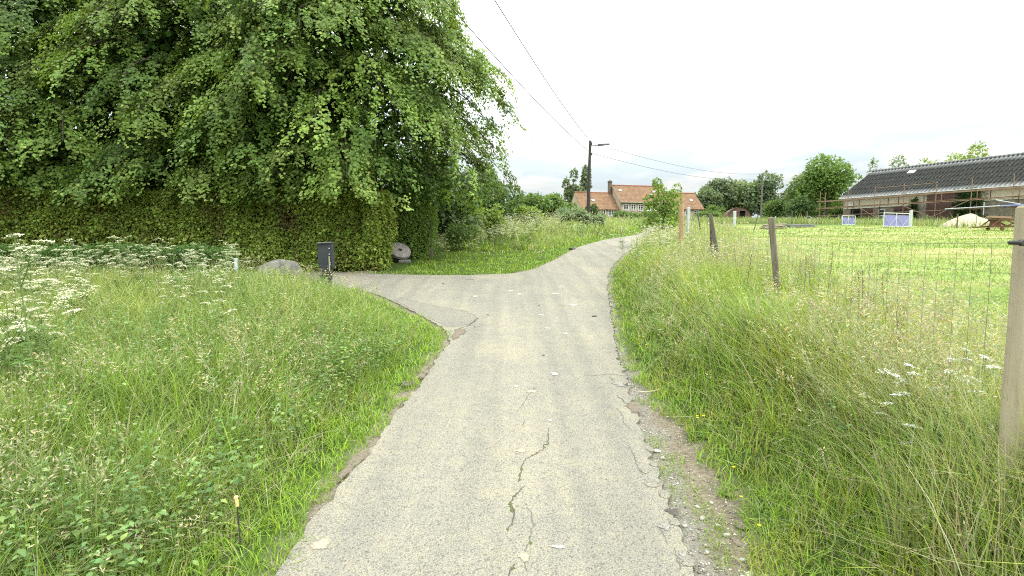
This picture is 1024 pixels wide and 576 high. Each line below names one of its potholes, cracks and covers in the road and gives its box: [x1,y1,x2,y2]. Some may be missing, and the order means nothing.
crack [506,429,549,576]
